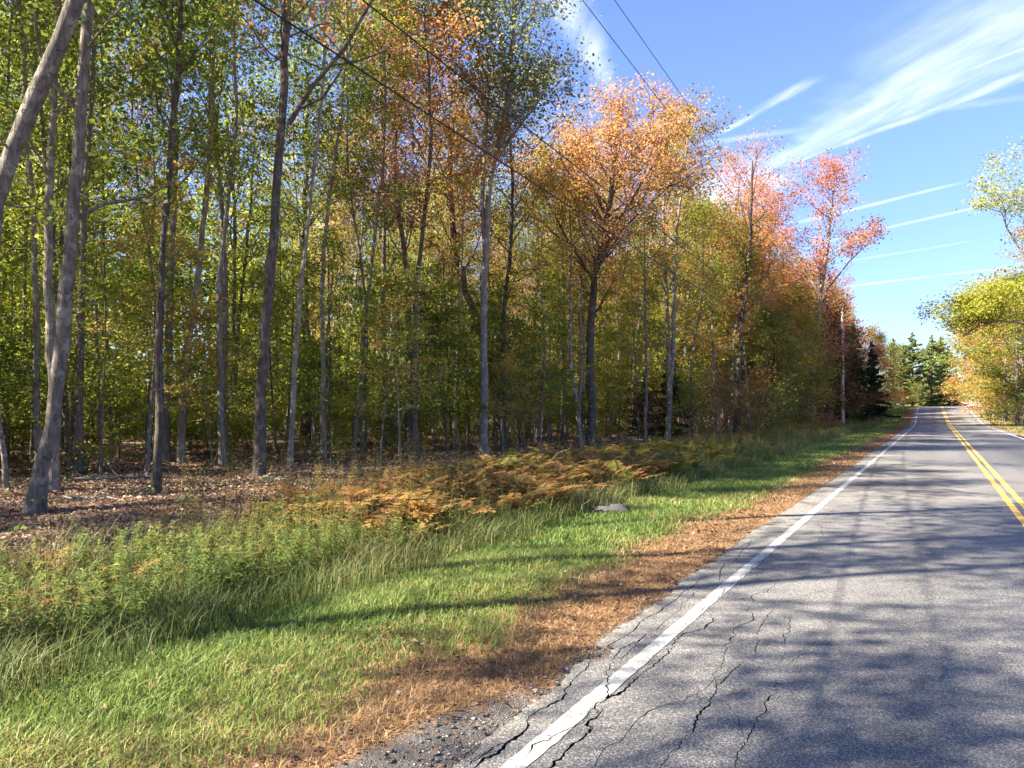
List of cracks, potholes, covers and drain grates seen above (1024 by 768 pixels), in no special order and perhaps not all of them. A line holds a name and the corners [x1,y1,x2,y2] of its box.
crack [464,542,814,768]
